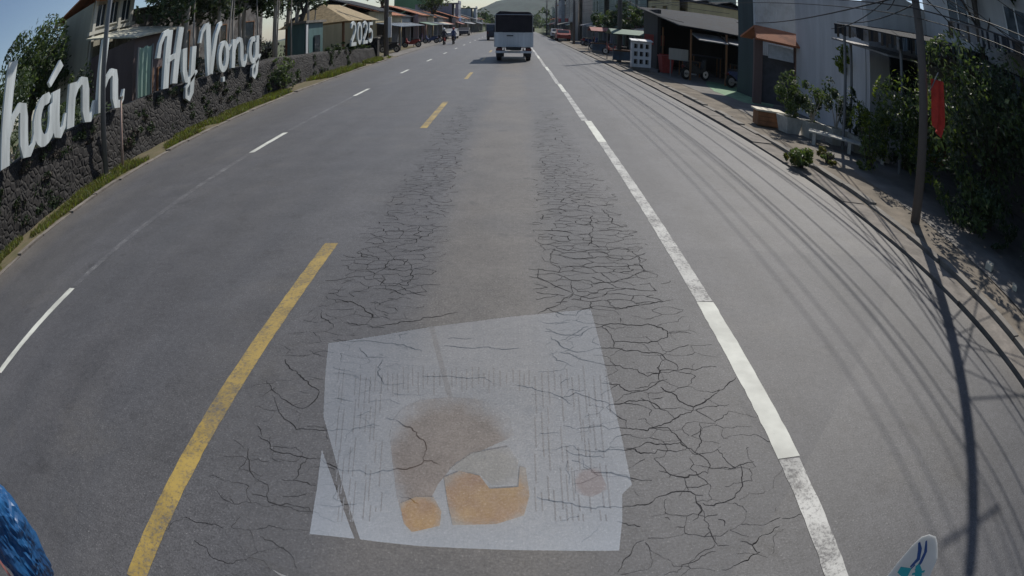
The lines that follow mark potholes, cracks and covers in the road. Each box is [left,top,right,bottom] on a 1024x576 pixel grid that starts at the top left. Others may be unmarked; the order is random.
crack [169,103,474,568]
crack [515,108,799,576]
